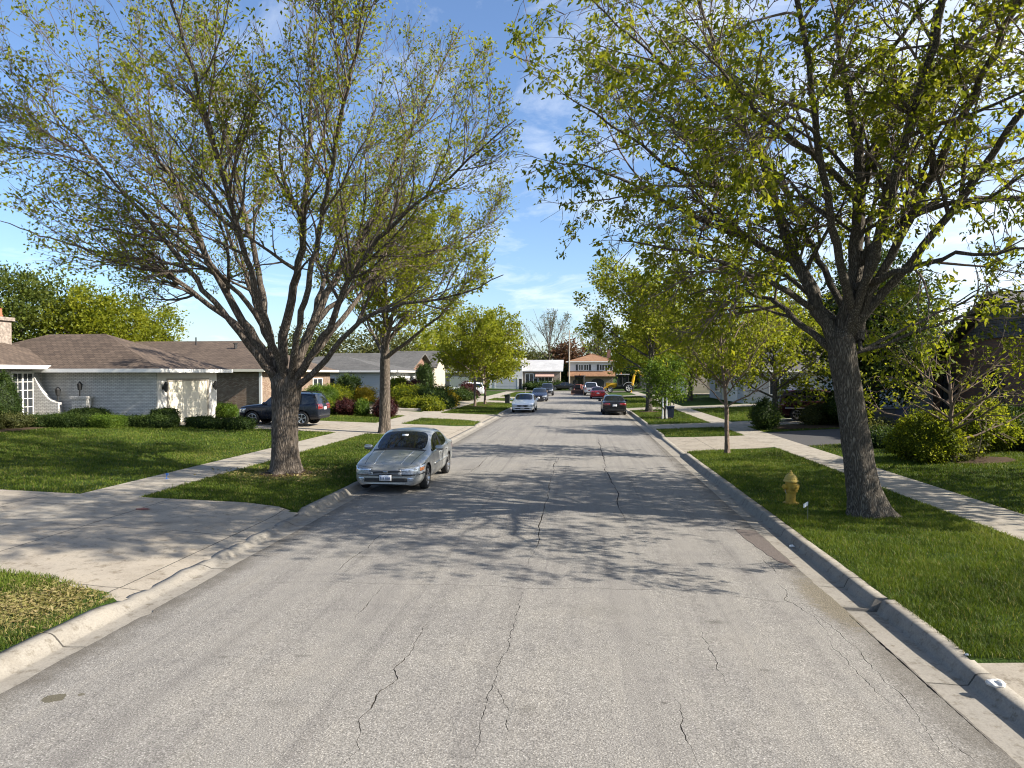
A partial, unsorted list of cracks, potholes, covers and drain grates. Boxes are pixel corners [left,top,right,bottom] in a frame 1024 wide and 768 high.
crack [344,624,427,764]
crack [762,557,973,767]
crack [528,458,559,563]
crack [475,600,520,758]
